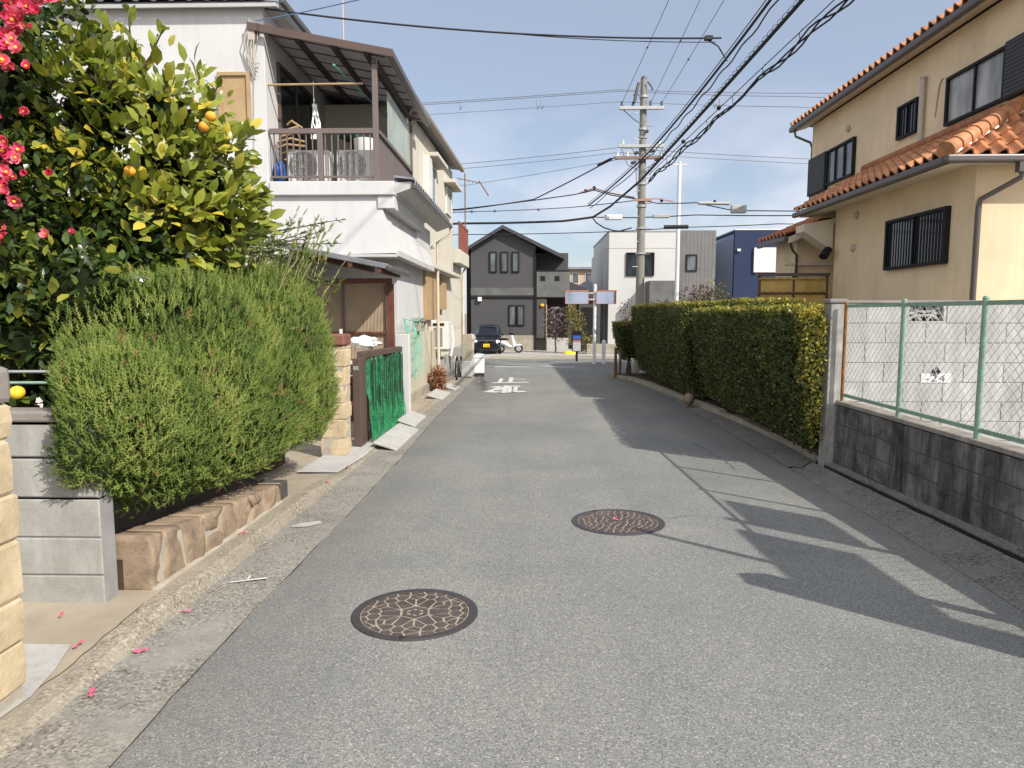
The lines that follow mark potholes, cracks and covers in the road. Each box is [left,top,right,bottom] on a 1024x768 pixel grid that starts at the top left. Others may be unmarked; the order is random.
manhole cover [572,509,665,536]
manhole cover [351,589,478,642]
